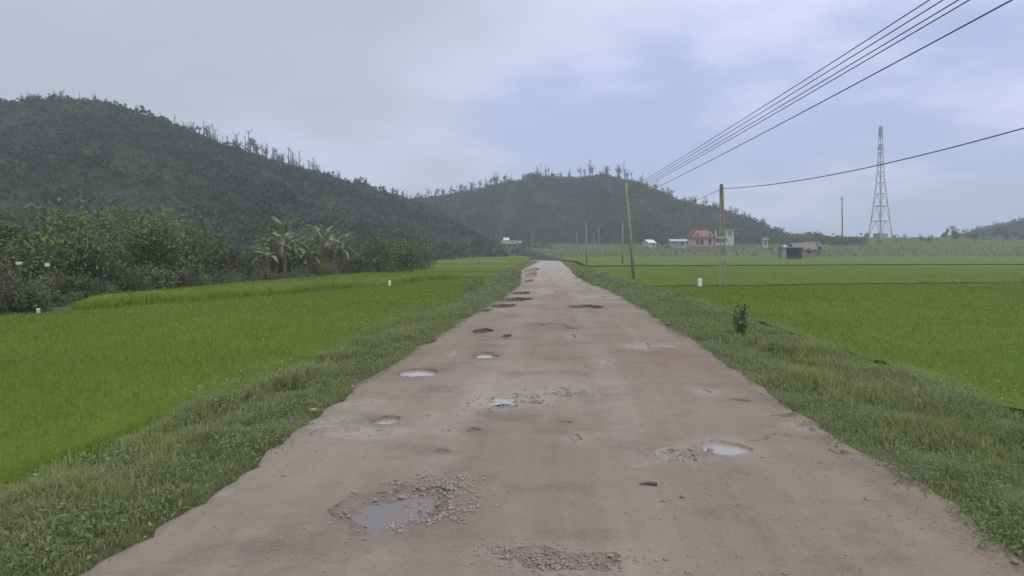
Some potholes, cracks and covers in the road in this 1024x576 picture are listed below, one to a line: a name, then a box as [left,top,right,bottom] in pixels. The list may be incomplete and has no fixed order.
pothole [397,366,439,377]
pothole [368,415,401,426]
pothole [639,442,707,469]
pothole [327,469,499,541]
pothole [538,385,595,401]
pothole [525,322,586,334]
pothole [453,536,676,576]
pothole [463,388,558,413]
pothole [685,435,765,458]
pothole [468,349,502,358]
